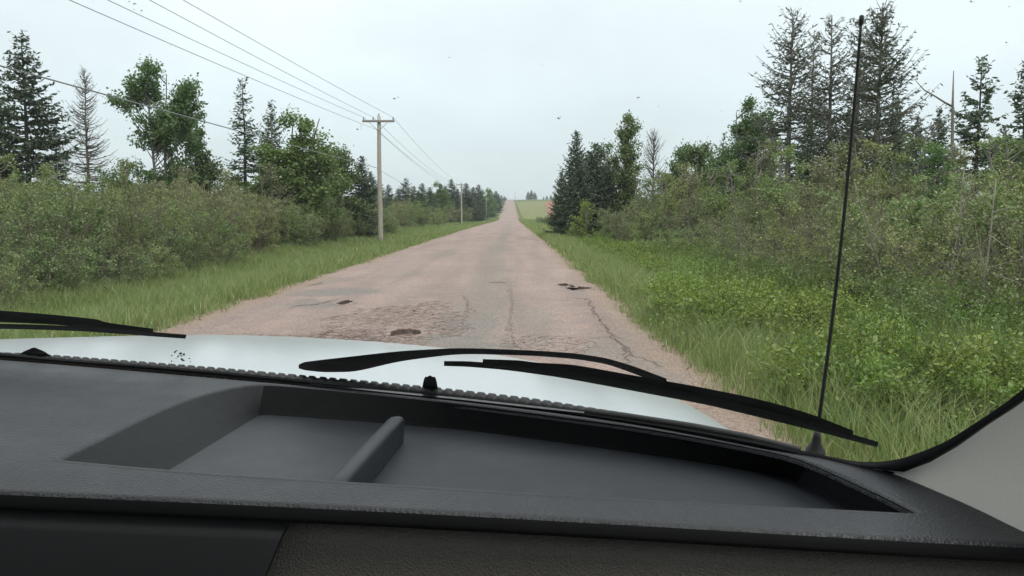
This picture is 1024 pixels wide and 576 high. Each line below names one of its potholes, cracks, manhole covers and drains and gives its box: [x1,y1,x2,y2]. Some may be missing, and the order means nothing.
crack [573,297,662,367]
crack [497,282,598,353]
crack [228,282,478,346]
pothole [384,329,427,338]
